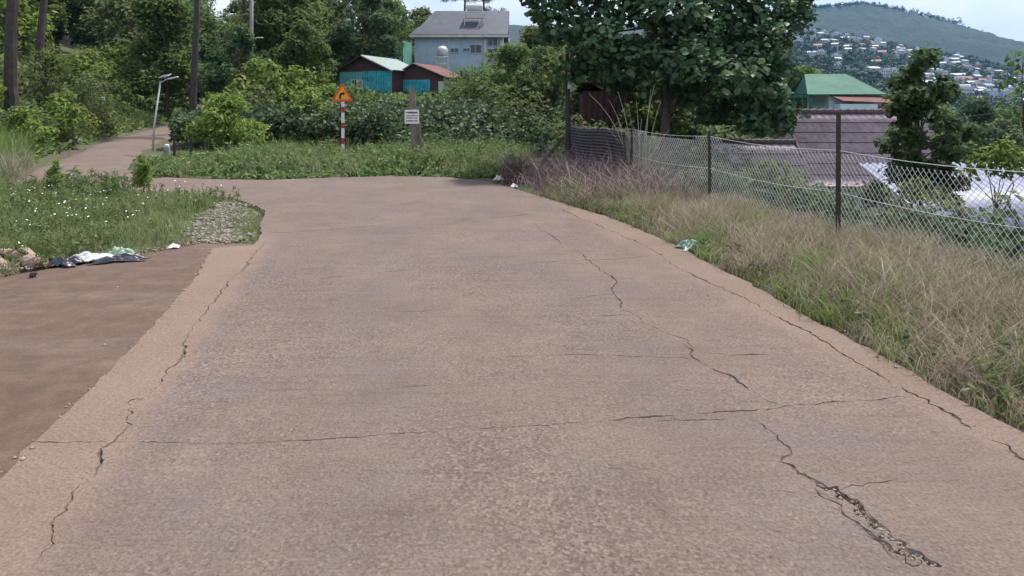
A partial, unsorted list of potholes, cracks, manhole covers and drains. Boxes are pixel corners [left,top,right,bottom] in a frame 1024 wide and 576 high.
crack [38,227,436,558]
crack [480,210,1024,568]
